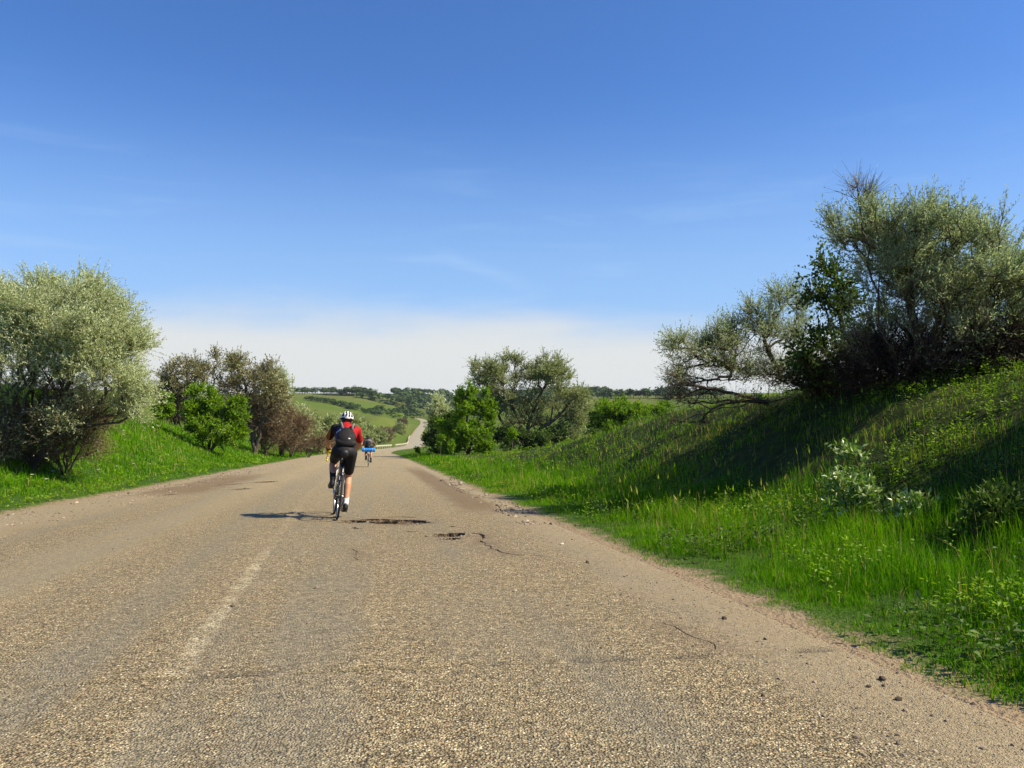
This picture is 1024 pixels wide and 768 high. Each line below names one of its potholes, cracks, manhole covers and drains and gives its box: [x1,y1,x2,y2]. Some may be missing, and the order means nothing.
crack [451,526,536,556]
